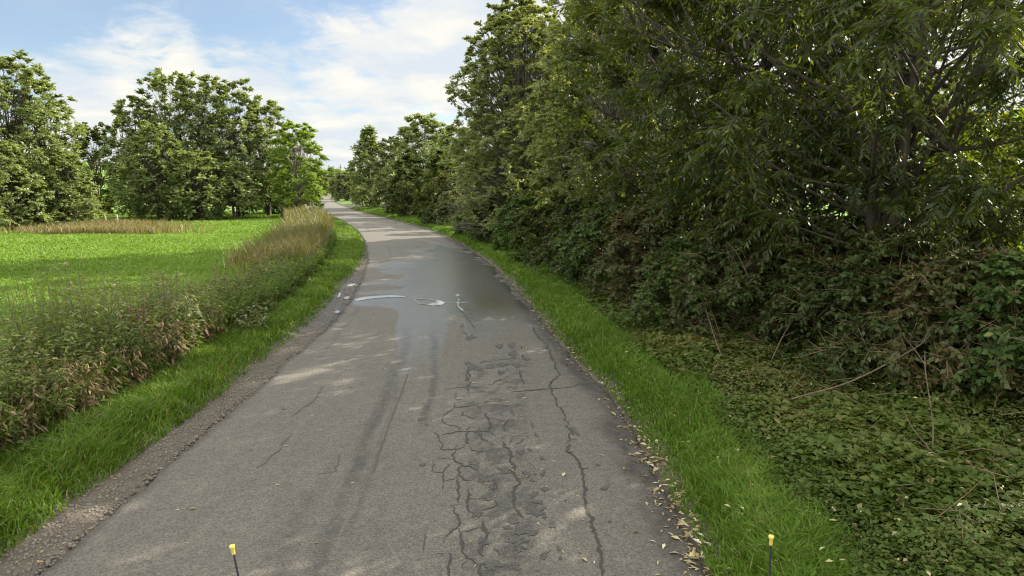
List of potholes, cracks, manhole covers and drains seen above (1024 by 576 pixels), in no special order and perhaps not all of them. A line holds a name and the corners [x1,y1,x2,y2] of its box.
crack [456,298,475,335]
crack [423,327,605,576]
